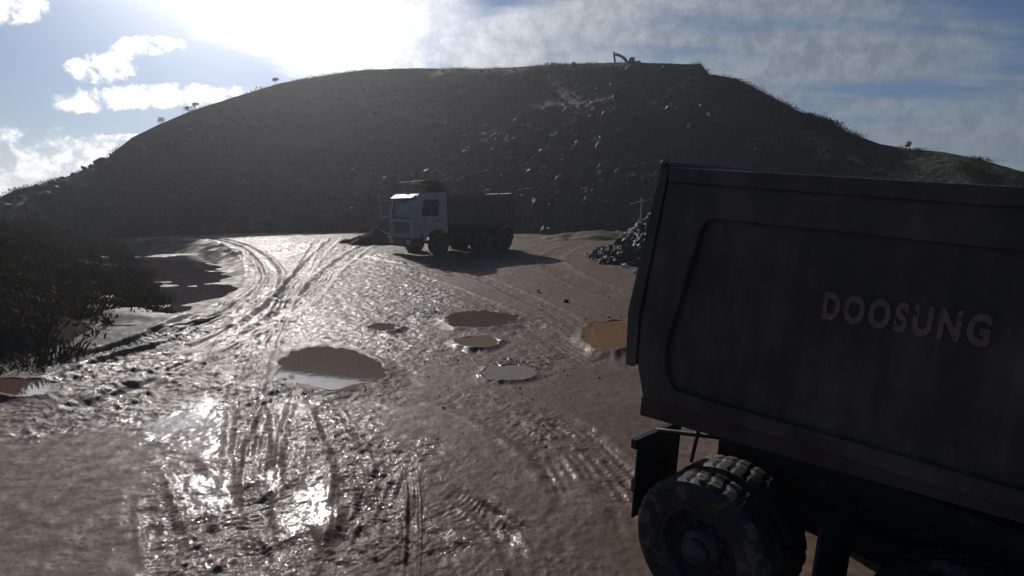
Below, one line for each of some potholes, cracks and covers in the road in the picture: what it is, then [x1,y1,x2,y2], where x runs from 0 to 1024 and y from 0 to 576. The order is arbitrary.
pothole [365,322,405,332]
pothole [0,376,65,398]
pothole [441,309,524,329]
pothole [268,343,394,394]
pothole [476,363,539,381]
pothole [451,335,503,349]
pothole [577,318,628,351]
